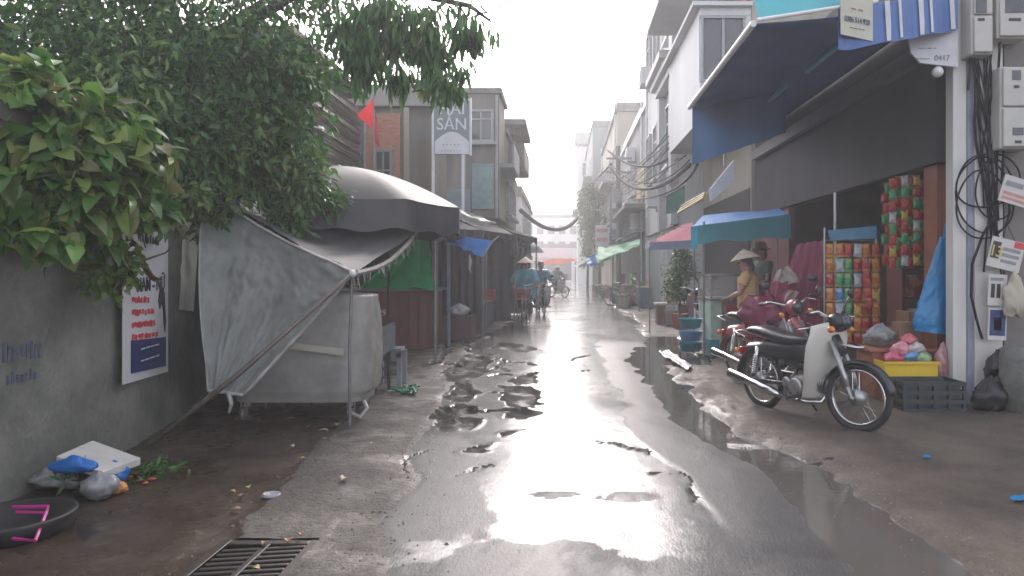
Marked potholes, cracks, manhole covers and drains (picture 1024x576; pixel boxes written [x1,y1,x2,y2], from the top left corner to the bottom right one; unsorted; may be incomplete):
pothole [504,407,543,419]
pothole [442,382,483,403]
pothole [434,417,484,431]
pothole [463,443,493,453]
crack [402,449,430,479]
pothole [507,372,539,385]
pothole [497,385,545,408]
pothole [442,354,494,384]
drain grate [177,540,318,576]
pothole [495,343,537,353]
pothole [428,404,479,420]
